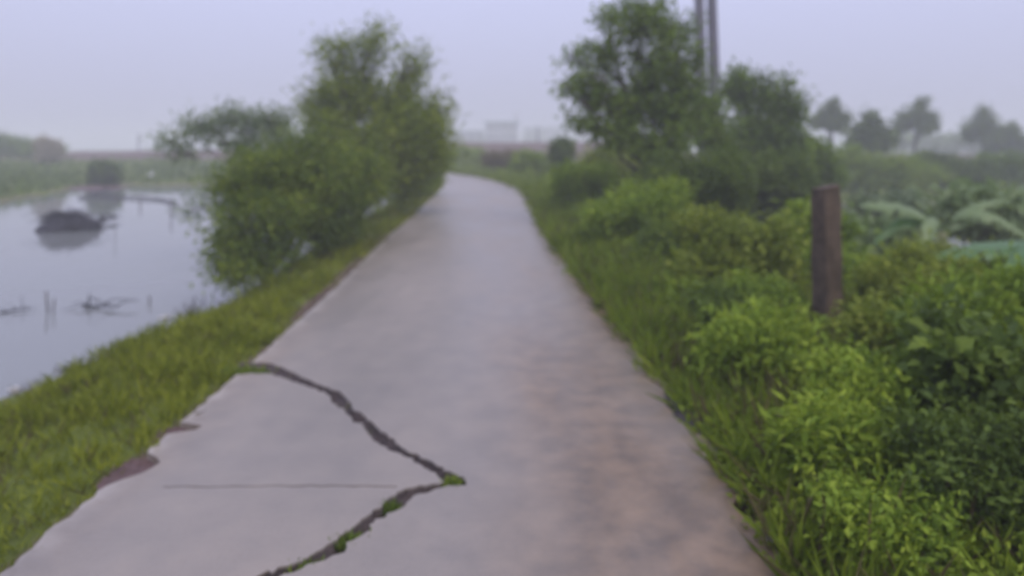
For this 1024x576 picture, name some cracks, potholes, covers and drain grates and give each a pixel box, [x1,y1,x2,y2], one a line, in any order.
crack [224,362,466,576]
